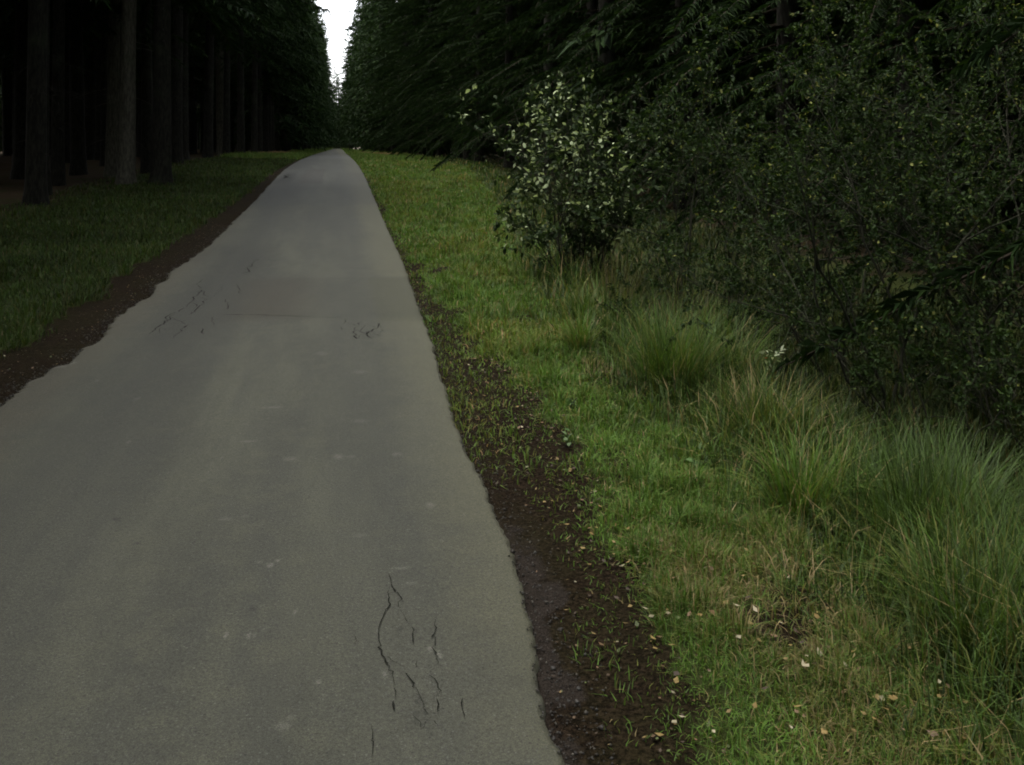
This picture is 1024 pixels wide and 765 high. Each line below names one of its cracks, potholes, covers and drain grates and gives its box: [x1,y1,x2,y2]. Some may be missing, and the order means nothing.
crack [355,575,465,754]
crack [149,259,258,338]
crack [342,319,382,339]
